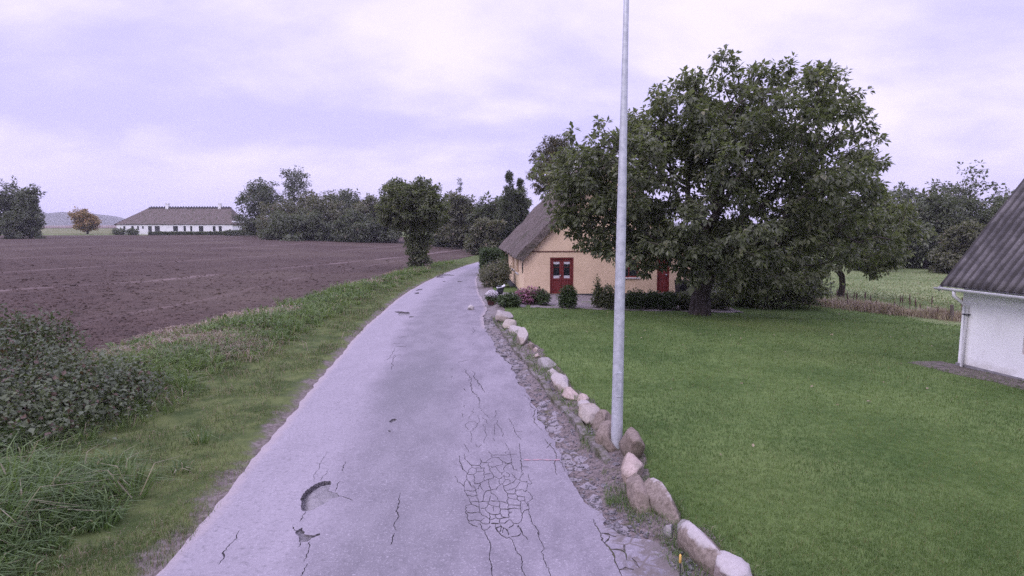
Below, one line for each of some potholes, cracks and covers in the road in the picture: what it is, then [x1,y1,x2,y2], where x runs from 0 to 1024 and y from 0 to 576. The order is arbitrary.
pothole [293,527,320,543]
crack [457,397,551,576]
pothole [300,481,339,511]
crack [593,519,640,576]
